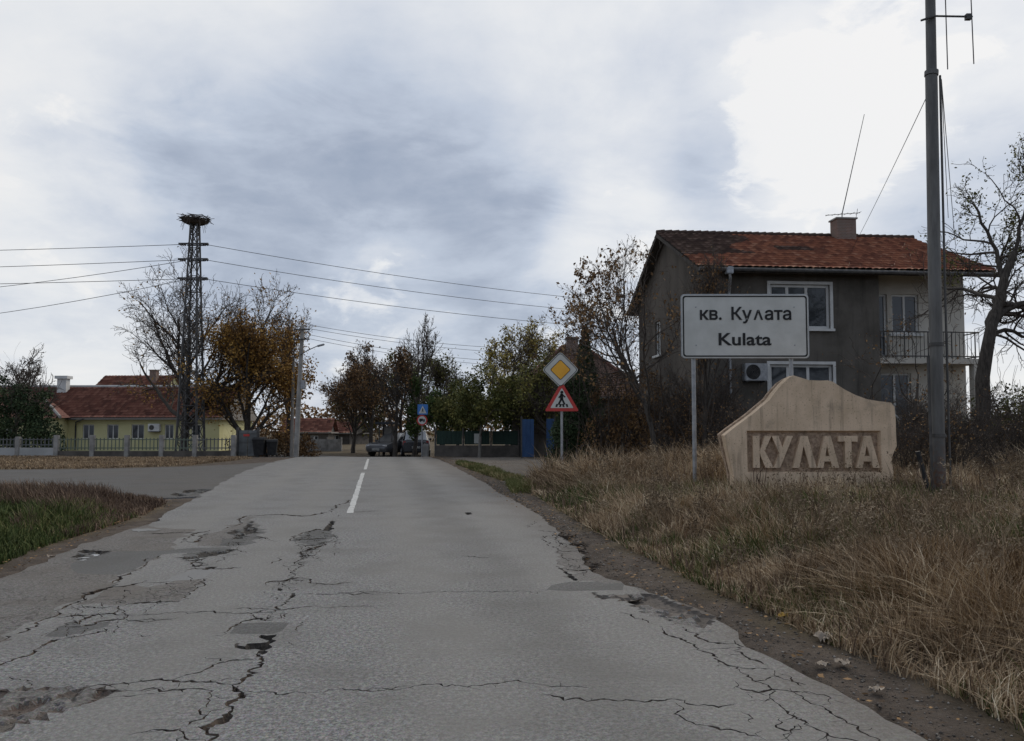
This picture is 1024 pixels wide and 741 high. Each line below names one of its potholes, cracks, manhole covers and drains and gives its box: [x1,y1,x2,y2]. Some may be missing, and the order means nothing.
pothole [235,635,276,655]
crack [630,614,880,741]
pothole [223,522,258,539]
crack [529,524,604,576]
crack [249,680,752,736]
pothole [72,550,110,561]
pothole [0,685,124,733]
crack [0,529,532,741]
